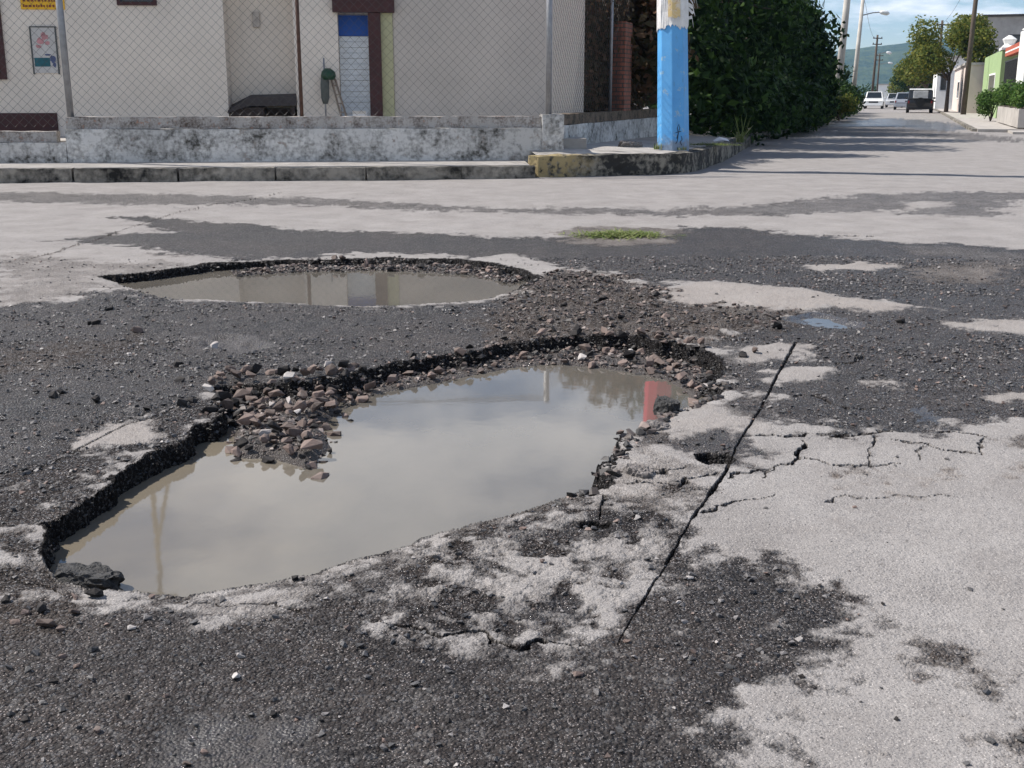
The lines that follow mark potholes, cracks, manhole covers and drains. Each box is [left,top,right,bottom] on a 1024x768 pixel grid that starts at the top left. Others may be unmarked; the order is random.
pothole [782,312,865,329]
crack [376,620,582,652]
pothole [103,257,538,307]
crack [617,342,988,645]
pothole [39,335,736,598]
